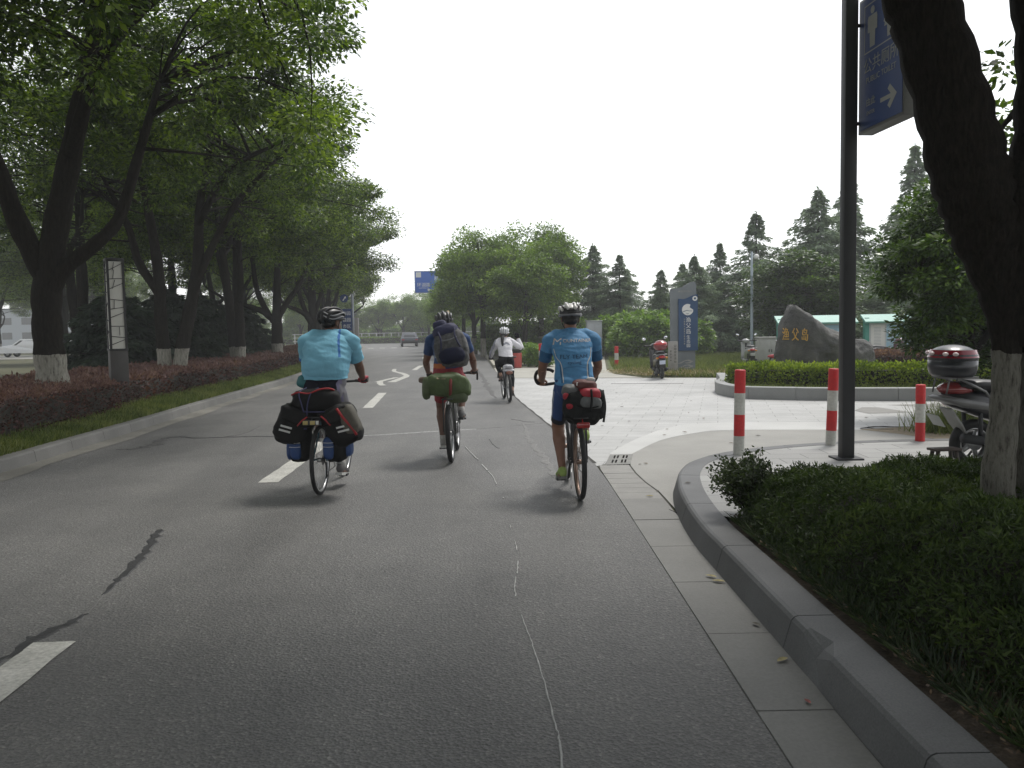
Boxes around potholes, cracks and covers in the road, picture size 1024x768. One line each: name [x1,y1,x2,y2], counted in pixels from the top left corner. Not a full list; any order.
crack [116,419,563,768]
drain grate [605,454,633,465]
